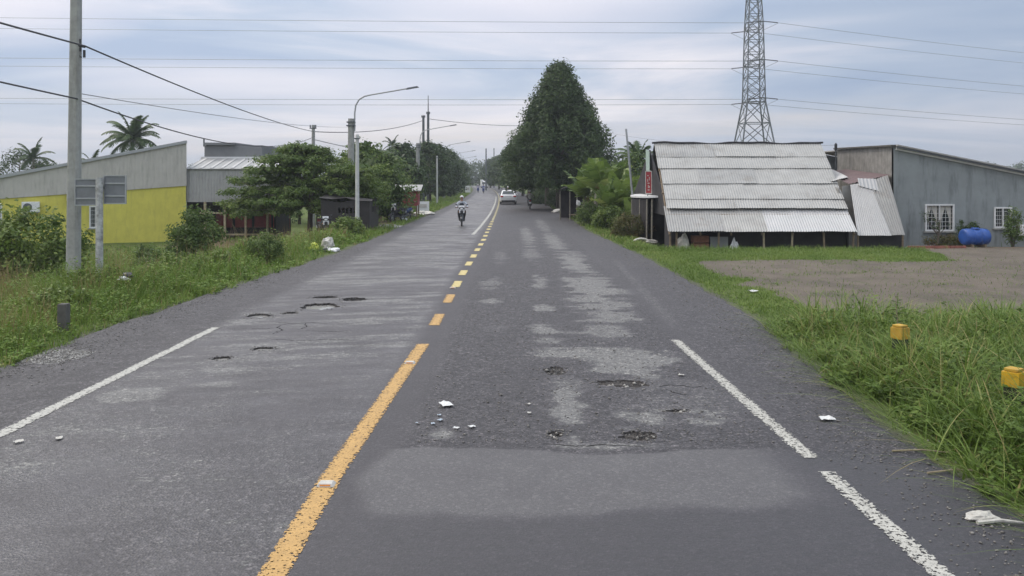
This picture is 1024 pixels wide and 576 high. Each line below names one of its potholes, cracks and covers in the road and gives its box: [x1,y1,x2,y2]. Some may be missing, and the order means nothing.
pothole [618,428,668,443]
crack [253,322,340,341]
pothole [593,376,657,390]
pothole [292,301,346,311]
pothole [535,364,573,376]
pothole [546,429,568,440]
